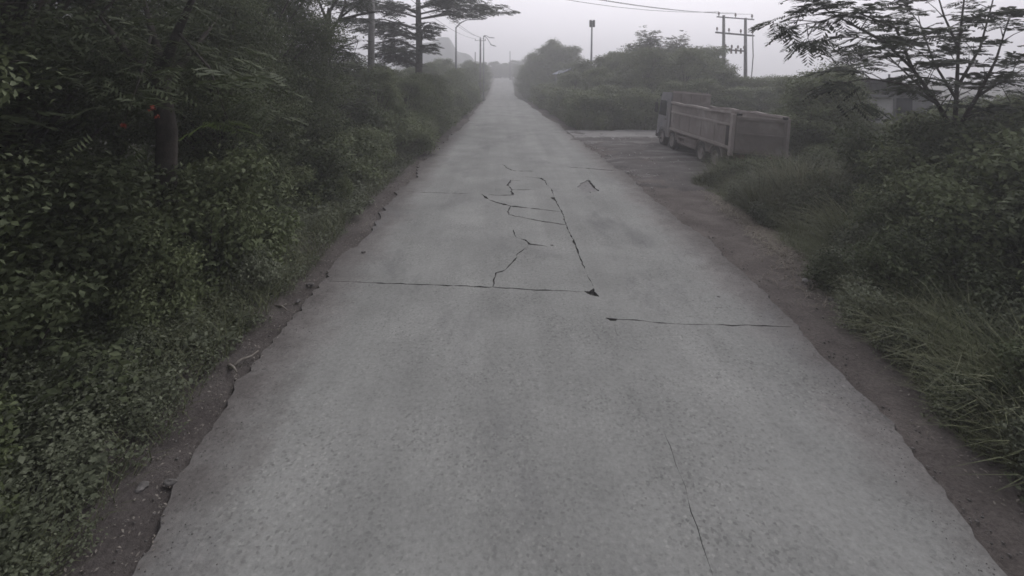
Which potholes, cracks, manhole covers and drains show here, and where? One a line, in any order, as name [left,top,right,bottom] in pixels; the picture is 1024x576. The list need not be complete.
crack [666,438,713,575]
crack [606,318,785,330]
crack [342,165,593,292]
